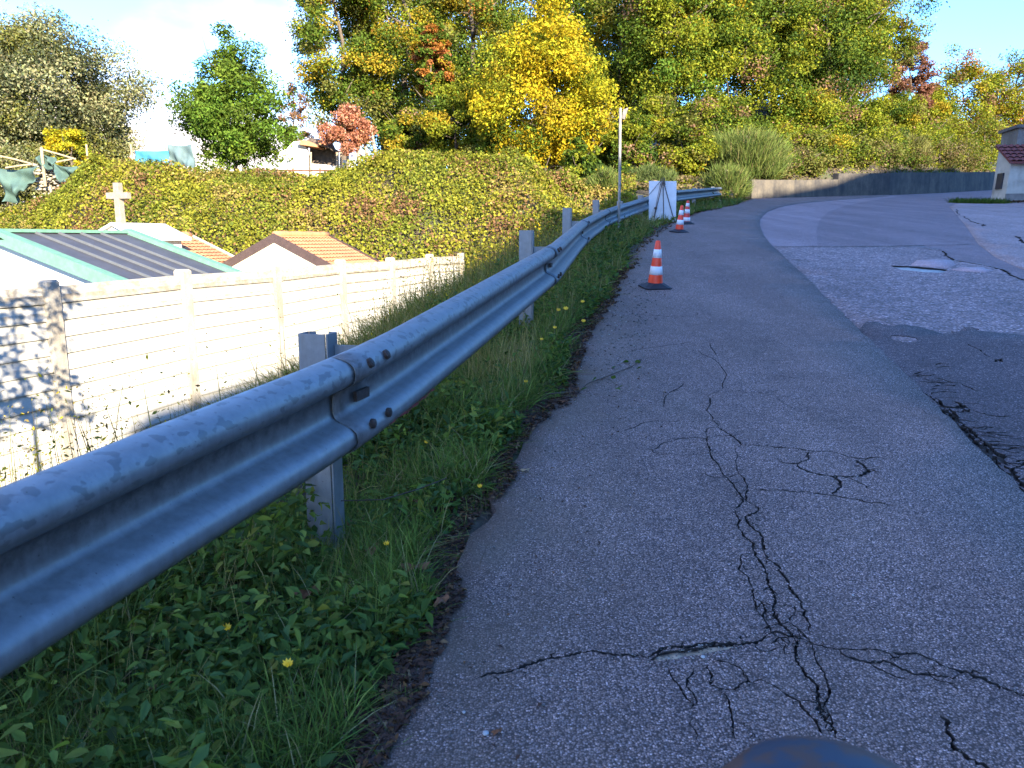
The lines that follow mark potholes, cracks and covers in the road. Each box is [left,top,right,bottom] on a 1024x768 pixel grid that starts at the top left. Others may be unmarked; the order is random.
crack [926,248,1024,280]
crack [940,716,989,768]
crack [474,345,1024,742]
